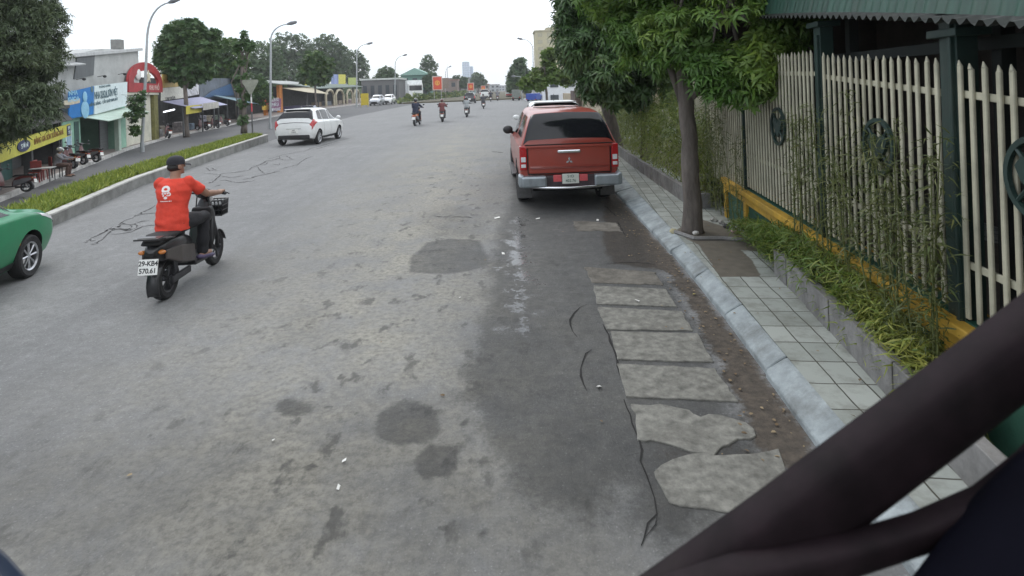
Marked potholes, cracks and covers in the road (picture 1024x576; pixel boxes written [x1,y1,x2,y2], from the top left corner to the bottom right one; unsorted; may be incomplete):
crack [569,304,658,546]
crack [83,205,156,244]
crack [204,138,349,187]
